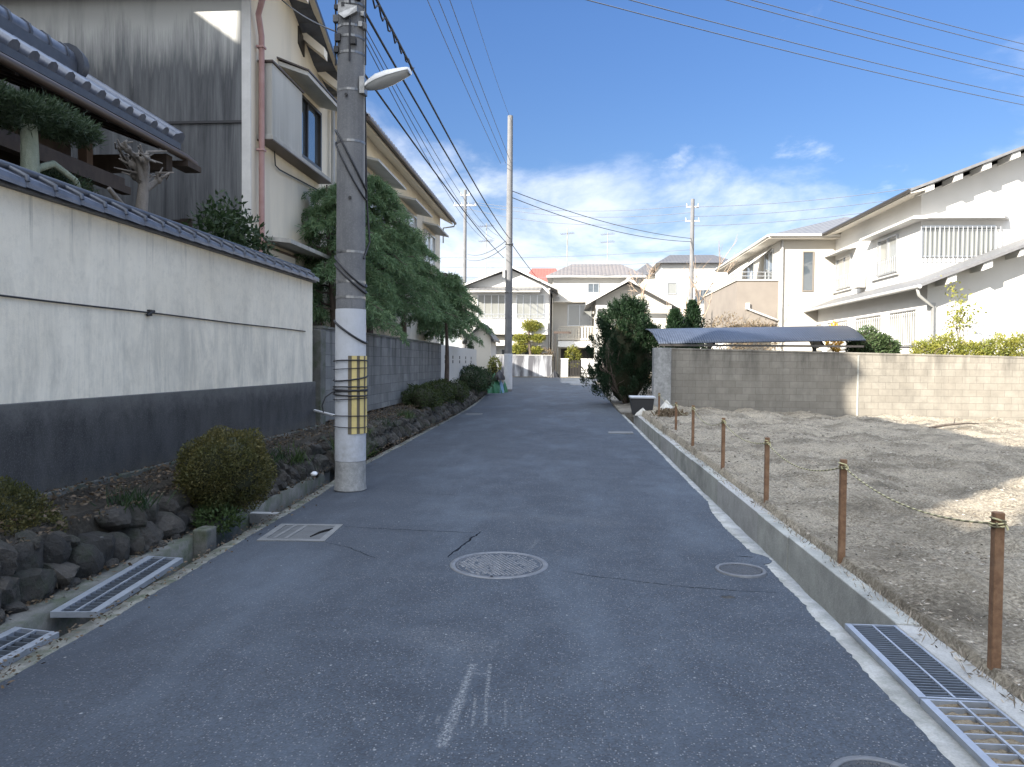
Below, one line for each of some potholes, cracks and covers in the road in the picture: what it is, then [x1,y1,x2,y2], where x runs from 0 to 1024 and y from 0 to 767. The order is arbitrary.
drain grate [920,698,1024,767]
drain grate [50,556,183,618]
manhole cover [715,562,767,578]
manhole cover [829,755,908,767]
manhole cover [450,551,548,579]
drain grate [0,627,59,670]
drain grate [845,623,988,704]
manhole cover [257,524,343,542]
